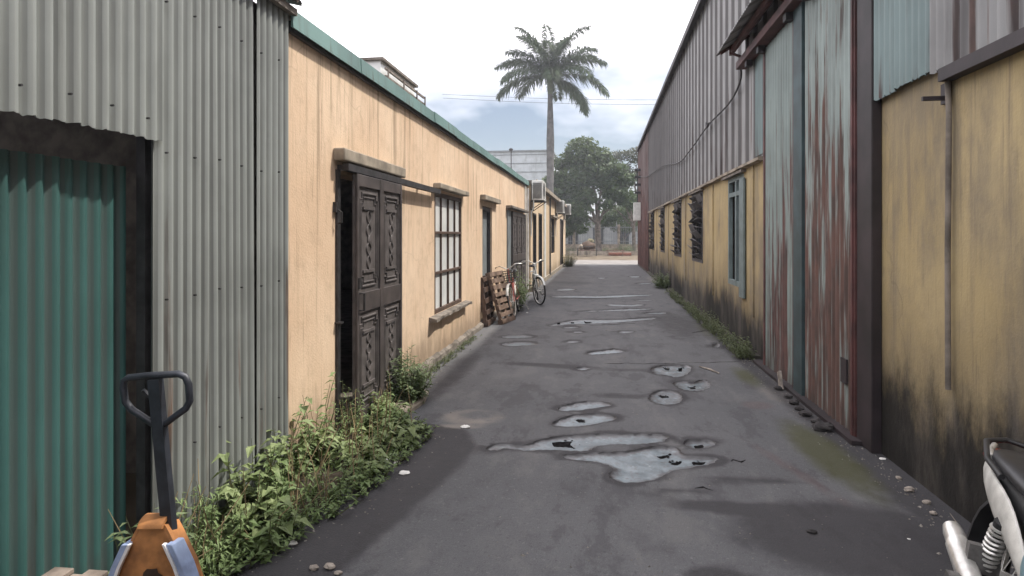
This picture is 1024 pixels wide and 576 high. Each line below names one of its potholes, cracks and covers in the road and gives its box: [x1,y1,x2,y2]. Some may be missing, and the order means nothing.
pothole [563,446,719,483]
pothole [549,317,655,326]
pothole [486,433,669,451]
pothole [682,439,716,448]
pothole [552,413,616,427]
pothole [648,390,683,405]
pothole [650,365,691,377]
pothole [673,379,711,391]
pothole [557,401,612,411]
